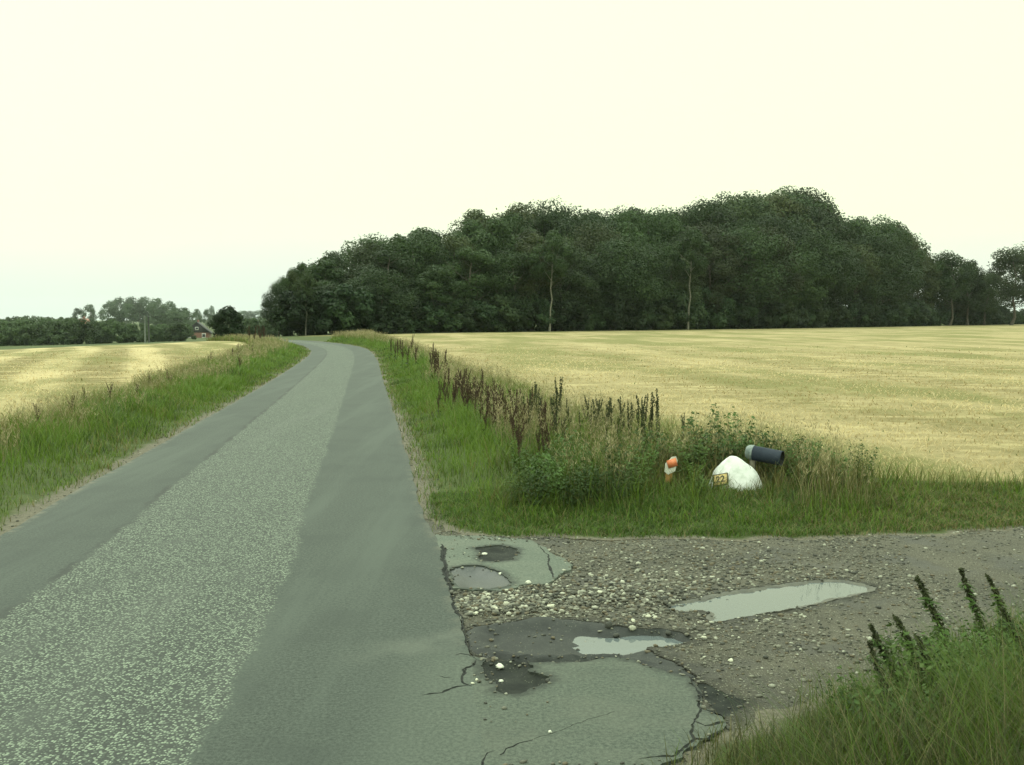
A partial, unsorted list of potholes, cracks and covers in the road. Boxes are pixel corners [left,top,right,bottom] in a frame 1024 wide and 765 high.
pothole [476,546,518,561]
pothole [450,566,510,589]
pothole [466,617,695,677]
pothole [482,660,547,694]
crack [425,544,477,695]
pothole [662,579,877,622]
crack [640,677,725,759]
crack [481,711,614,765]
